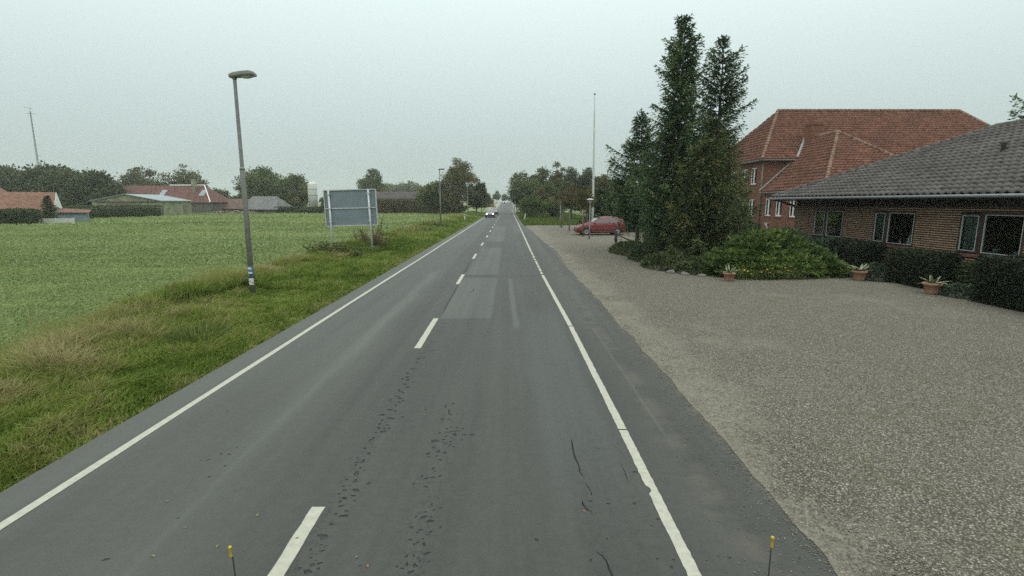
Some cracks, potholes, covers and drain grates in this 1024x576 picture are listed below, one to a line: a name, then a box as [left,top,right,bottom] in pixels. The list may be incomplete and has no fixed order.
crack [571,440,601,513]
crack [597,552,614,576]
